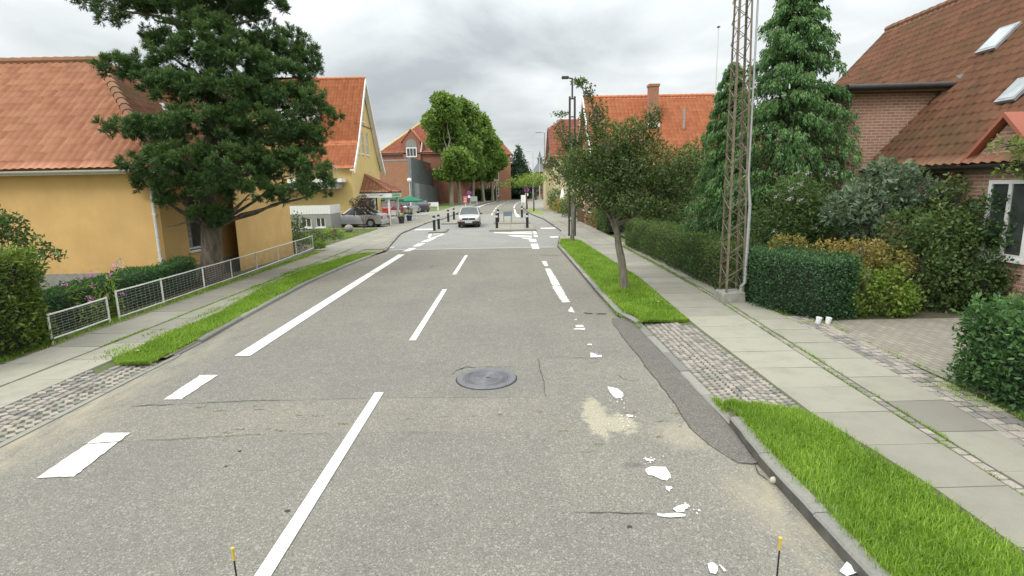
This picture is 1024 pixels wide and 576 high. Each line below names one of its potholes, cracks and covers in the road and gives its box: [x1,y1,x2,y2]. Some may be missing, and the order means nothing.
manhole cover [456,368,517,390]
